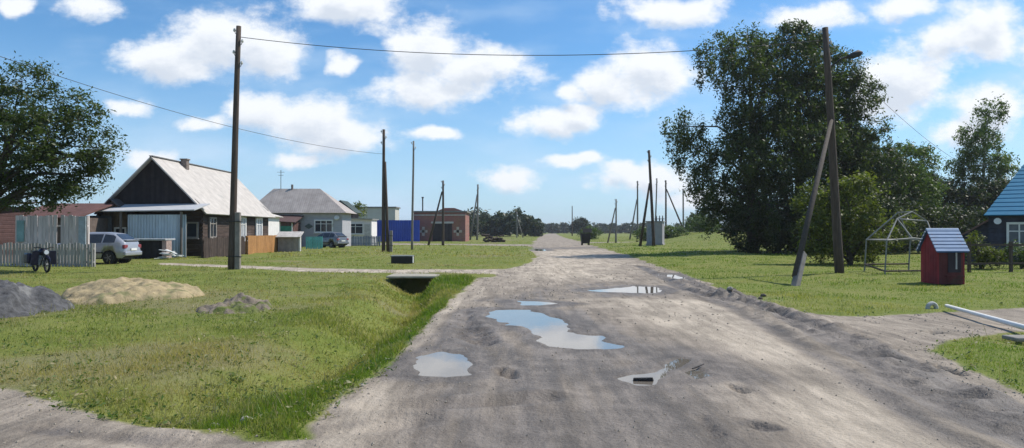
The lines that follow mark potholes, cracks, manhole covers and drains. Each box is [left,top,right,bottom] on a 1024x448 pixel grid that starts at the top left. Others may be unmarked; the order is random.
pothole [405,349,480,377]
pothole [503,368,520,379]
pothole [726,384,752,394]
pothole [585,285,667,293]
pothole [482,308,632,348]
pothole [735,419,786,432]
pothole [614,357,695,386]
